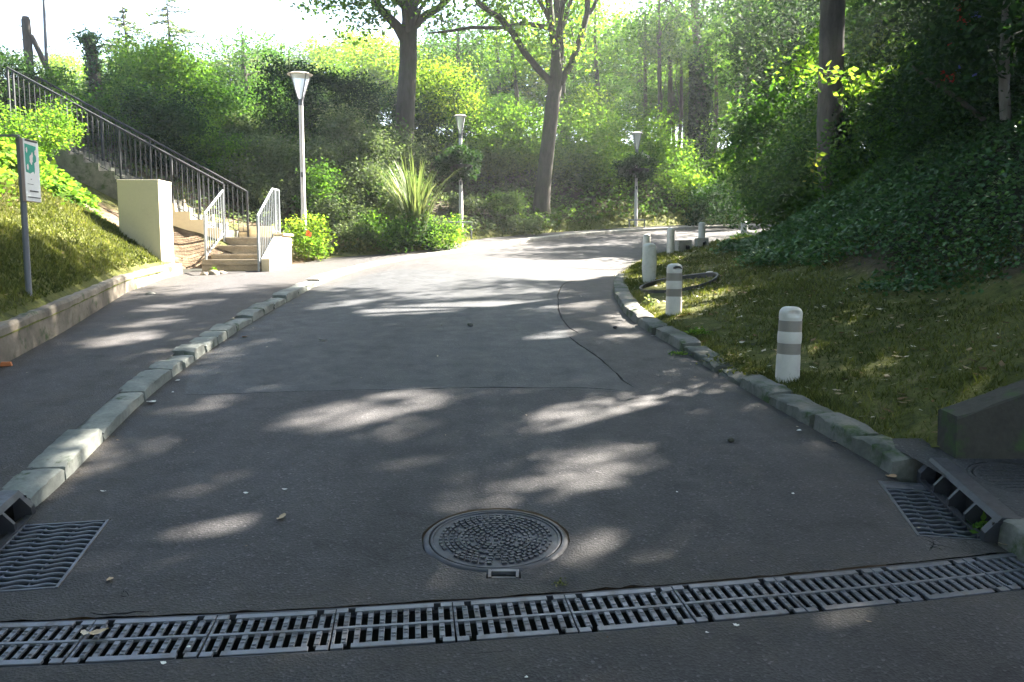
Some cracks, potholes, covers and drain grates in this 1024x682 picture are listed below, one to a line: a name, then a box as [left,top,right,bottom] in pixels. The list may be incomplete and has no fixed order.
drain grate [871,559,1010,602]
drain grate [878,481,984,566]
drain grate [0,620,95,667]
manhole cover [422,510,569,578]
drain grate [453,595,578,642]
drain grate [330,602,455,651]
drain grate [0,519,110,623]
drain grate [672,577,807,623]
drain grate [64,615,217,665]
drain grate [774,569,912,613]
drain grate [564,587,695,633]
